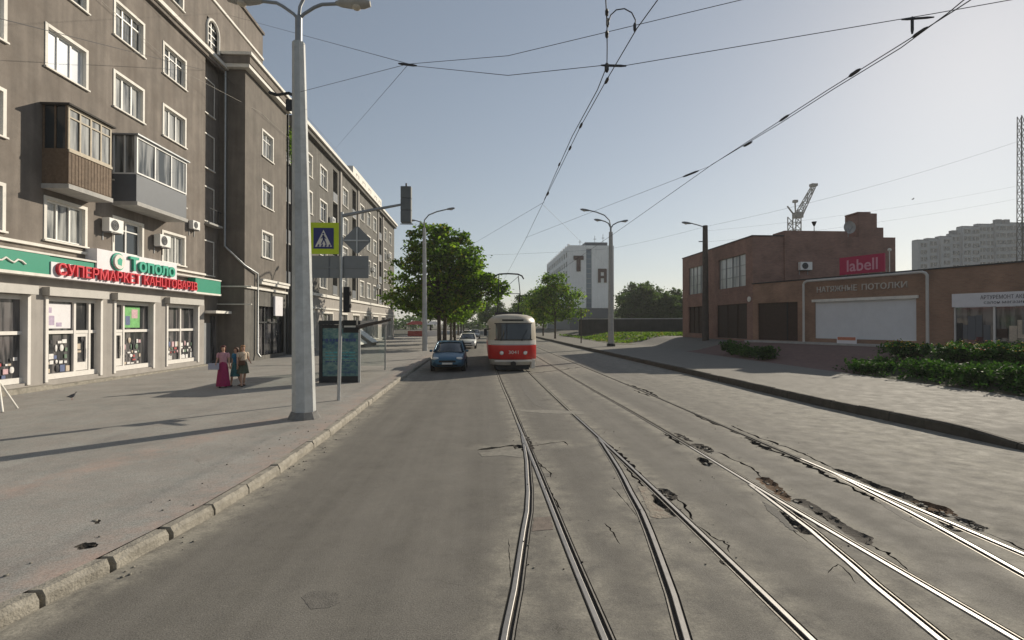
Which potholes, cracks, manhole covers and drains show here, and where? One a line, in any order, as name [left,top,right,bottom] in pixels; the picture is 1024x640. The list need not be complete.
pothole [690,443,714,453]
pothole [777,509,812,535]
pothole [909,500,958,518]
pothole [656,488,678,502]
pothole [937,518,966,533]
pothole [756,477,792,502]
pothole [793,499,874,546]
pothole [652,494,678,517]
pothole [953,516,989,532]
crack [605,442,643,544]
pothole [832,468,922,506]
